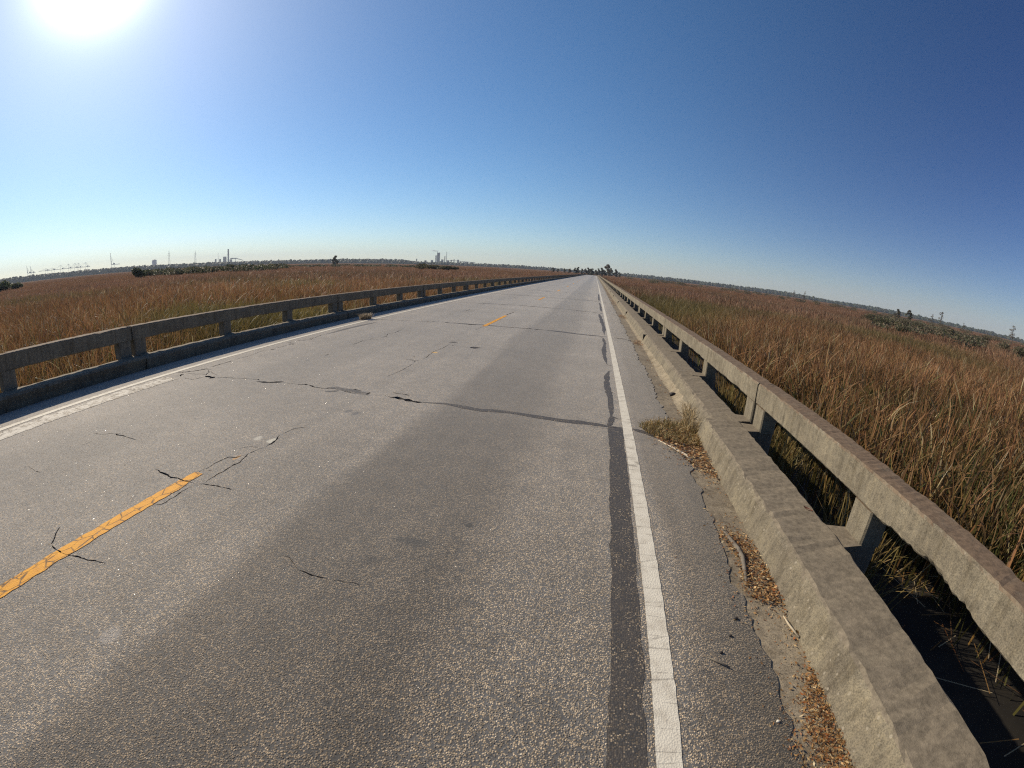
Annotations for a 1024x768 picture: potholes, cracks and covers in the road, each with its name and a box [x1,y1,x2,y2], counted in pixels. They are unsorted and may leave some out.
crack [156,427,305,505]
crack [180,290,656,438]
crack [282,555,361,587]
crack [48,527,103,563]
